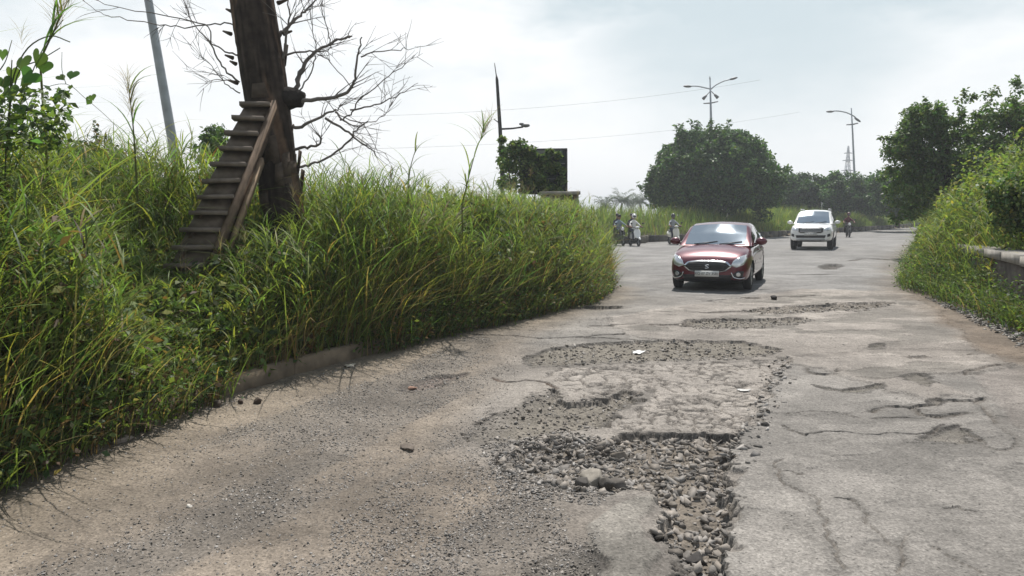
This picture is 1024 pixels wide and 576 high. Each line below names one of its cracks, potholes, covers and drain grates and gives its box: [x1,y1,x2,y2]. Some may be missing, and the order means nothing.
pothole [458,388,648,450]
pothole [862,342,888,350]
crack [472,294,1024,454]
pothole [520,338,785,368]
pothole [678,317,816,330]
pothole [490,429,748,576]
pothole [741,301,898,315]
crack [930,546,987,575]
crack [771,458,912,576]
